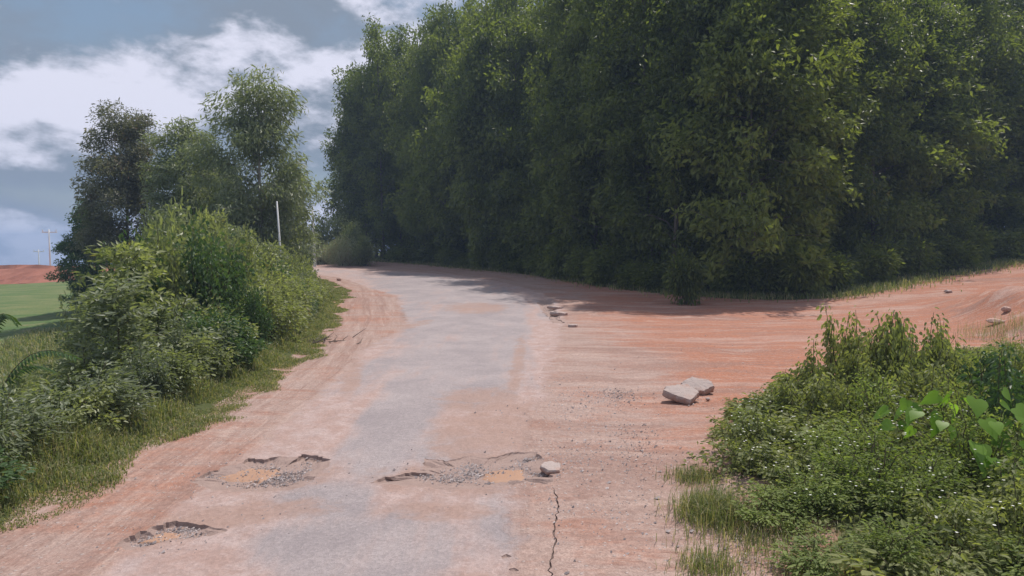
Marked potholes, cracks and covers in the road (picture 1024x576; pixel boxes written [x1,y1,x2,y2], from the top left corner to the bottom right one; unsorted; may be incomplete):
crack [547,487,560,576]
pothole [371,452,553,490]
pothole [114,521,228,550]
pothole [191,454,331,492]
